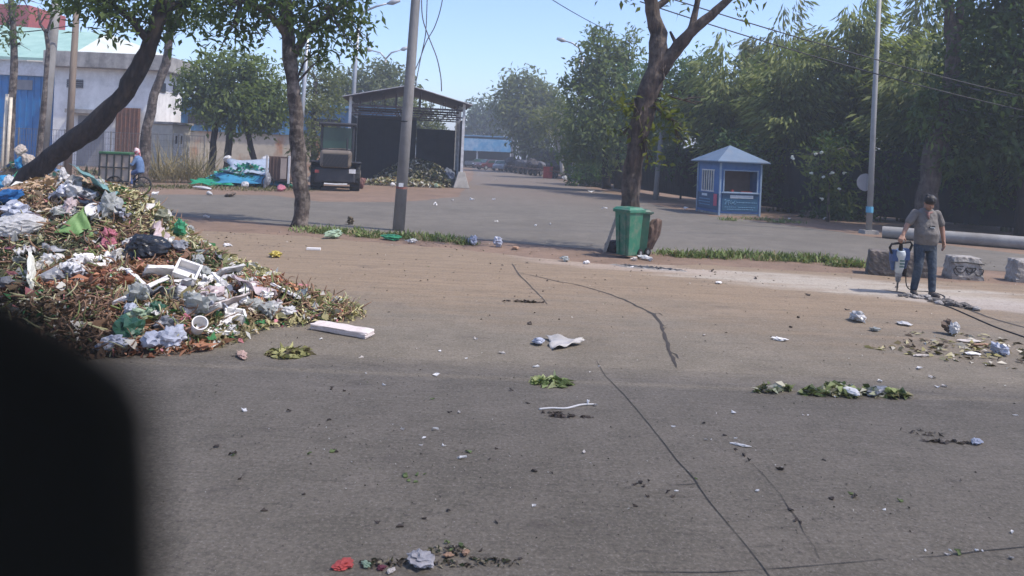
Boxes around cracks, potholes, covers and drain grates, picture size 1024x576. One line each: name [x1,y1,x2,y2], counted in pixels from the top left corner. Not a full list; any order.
crack [922,546,1024,557]
crack [512,264,679,367]
crack [637,473,888,576]
